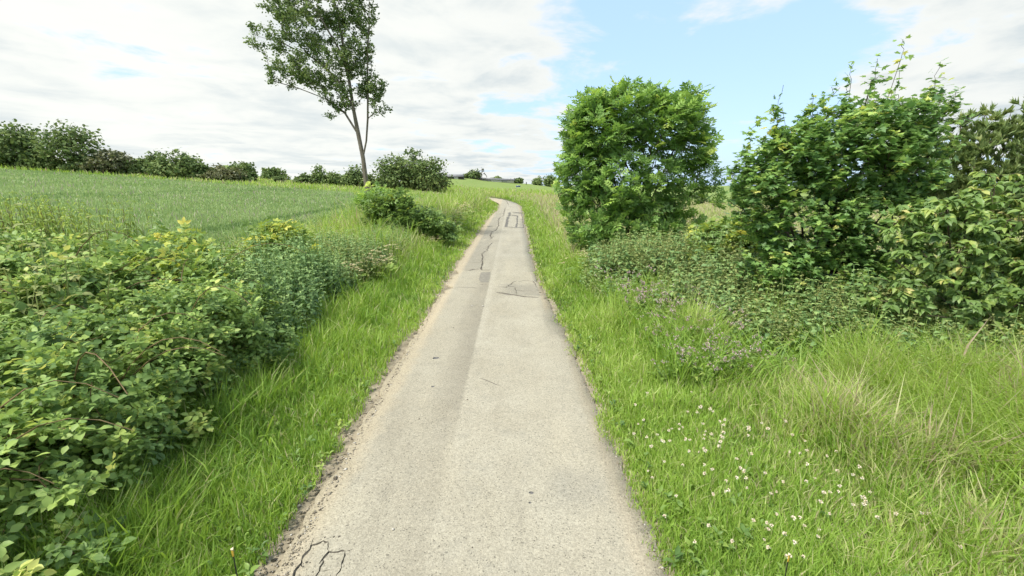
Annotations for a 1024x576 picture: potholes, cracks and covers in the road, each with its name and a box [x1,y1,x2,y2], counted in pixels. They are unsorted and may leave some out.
crack [456,210,539,298]
crack [292,535,353,576]
